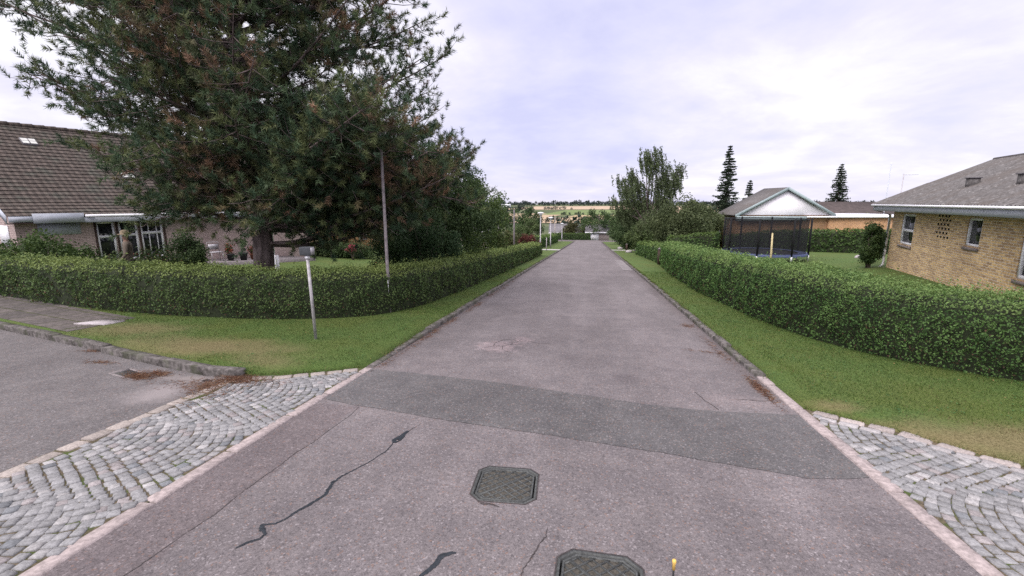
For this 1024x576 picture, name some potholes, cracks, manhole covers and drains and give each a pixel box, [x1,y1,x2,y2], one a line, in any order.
crack [419,551,456,576]
crack [521,527,548,576]
manhole cover [554,548,645,576]
manhole cover [469,466,540,505]
drain grate [109,368,154,380]
crack [235,424,420,548]
